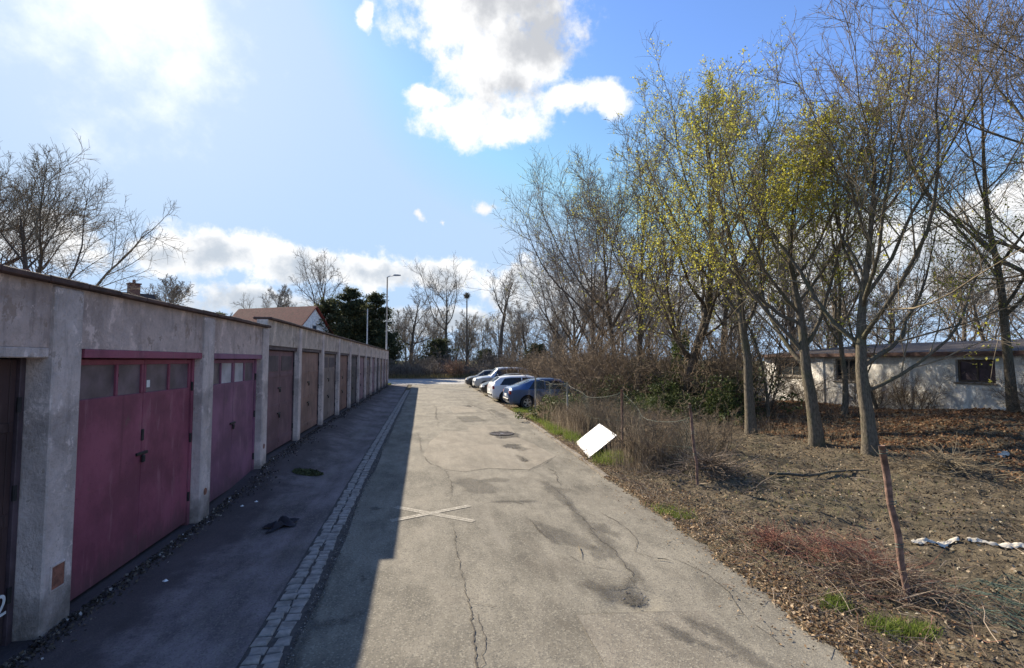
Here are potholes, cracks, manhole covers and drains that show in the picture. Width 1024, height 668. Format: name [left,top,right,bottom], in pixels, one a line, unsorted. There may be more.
crack [453,525,496,668]
crack [418,396,460,501]
crack [473,458,644,592]
